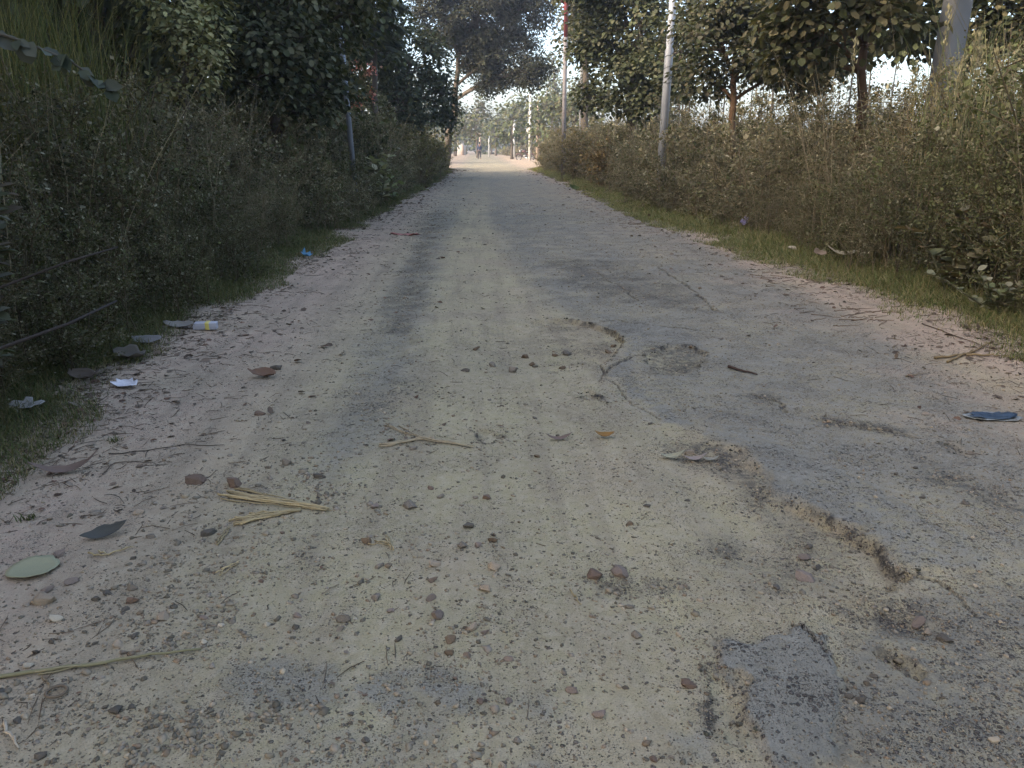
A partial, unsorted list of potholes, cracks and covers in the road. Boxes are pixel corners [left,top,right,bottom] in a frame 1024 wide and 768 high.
pothole [620,419,922,613]
crack [601,266,719,331]
crack [599,354,661,420]
pothole [642,343,709,376]
